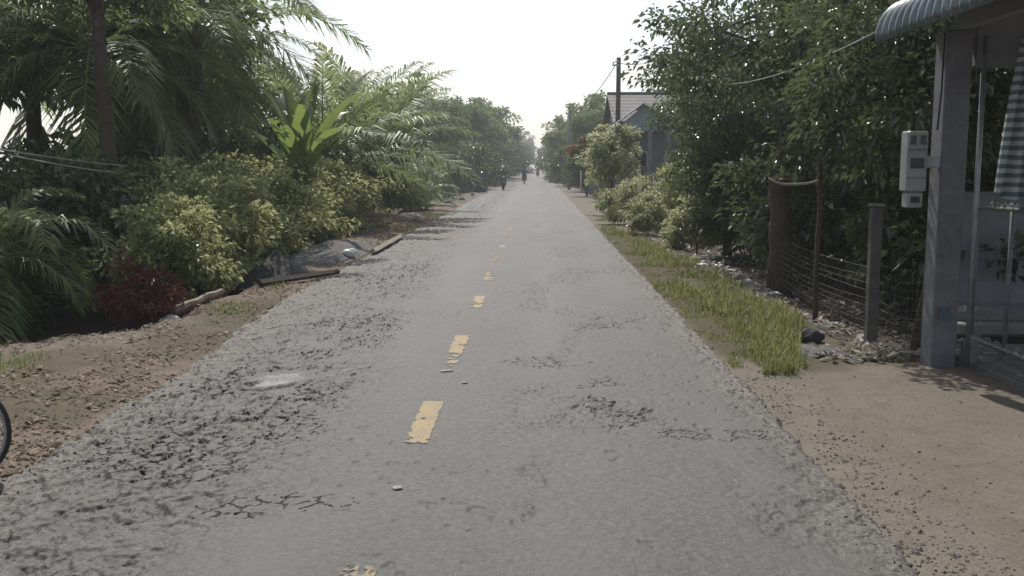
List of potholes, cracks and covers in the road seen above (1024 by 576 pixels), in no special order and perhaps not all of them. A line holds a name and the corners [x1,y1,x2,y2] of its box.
crack [191,492,360,519]
crack [60,360,365,502]
crack [502,356,769,442]
